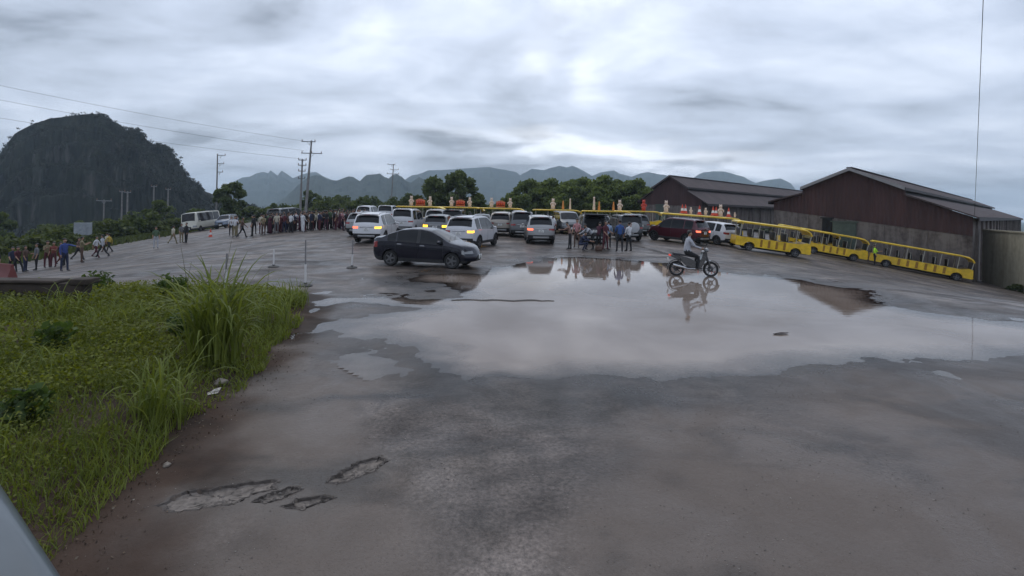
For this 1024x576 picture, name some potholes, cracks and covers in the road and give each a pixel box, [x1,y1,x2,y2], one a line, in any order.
pothole [154,478,282,513]
pothole [251,486,304,504]
pothole [279,495,338,511]
pothole [326,455,389,485]
